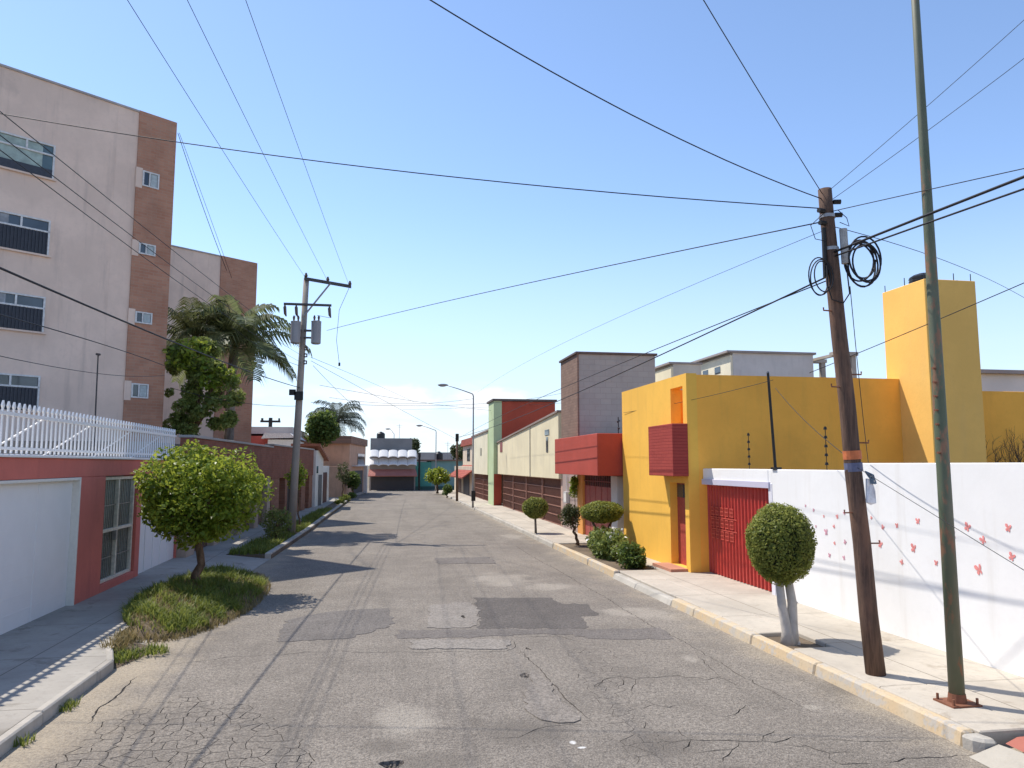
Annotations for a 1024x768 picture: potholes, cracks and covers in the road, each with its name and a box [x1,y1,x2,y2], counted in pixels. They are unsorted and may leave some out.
pothole [378,760,404,768]
crack [163,636,977,765]
crack [55,678,315,768]
